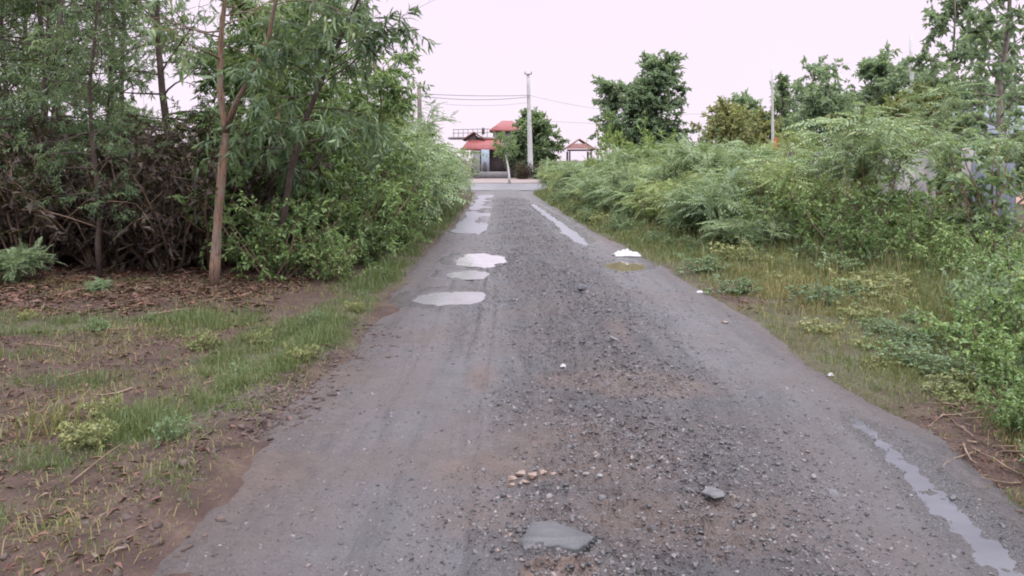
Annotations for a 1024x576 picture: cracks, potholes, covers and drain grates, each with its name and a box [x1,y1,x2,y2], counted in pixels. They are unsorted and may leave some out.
pothole [400,288,500,306]
pothole [446,253,514,268]
pothole [600,259,654,272]
pothole [438,269,495,281]
